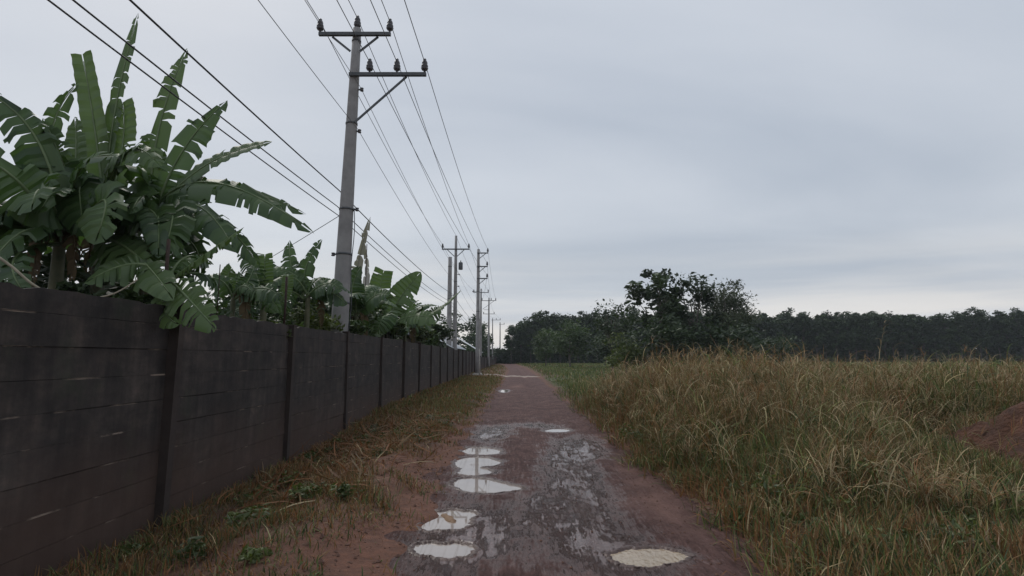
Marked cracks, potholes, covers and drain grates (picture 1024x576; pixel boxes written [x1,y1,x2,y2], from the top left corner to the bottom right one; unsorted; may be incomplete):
pothole [458,446,504,455]
pothole [448,476,528,494]
pothole [452,456,504,476]
pothole [407,540,481,561]
pothole [603,545,696,570]
pothole [416,508,482,533]
